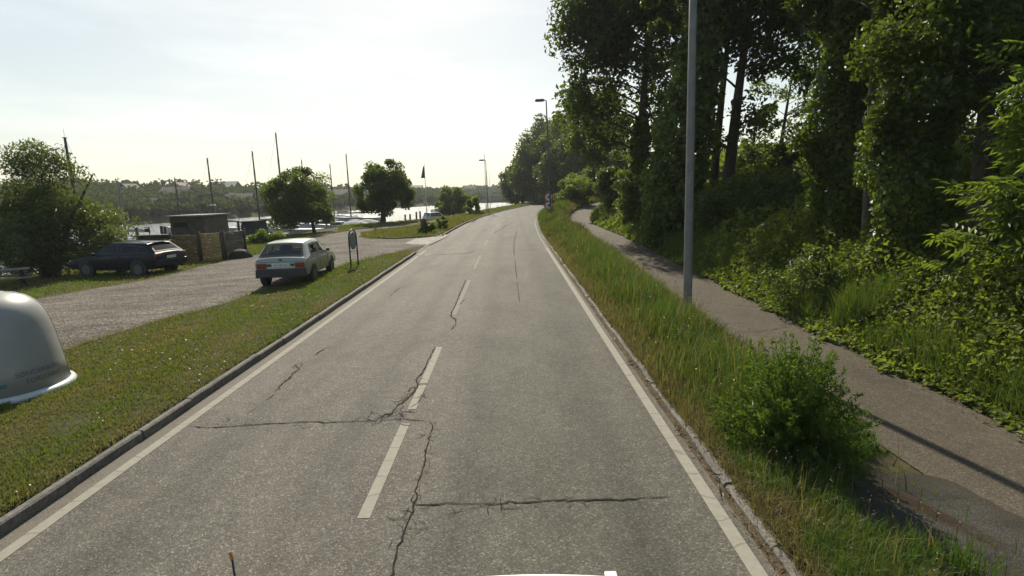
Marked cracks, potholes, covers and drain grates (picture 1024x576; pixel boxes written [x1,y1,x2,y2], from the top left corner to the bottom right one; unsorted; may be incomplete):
crack [196,347,673,576]
